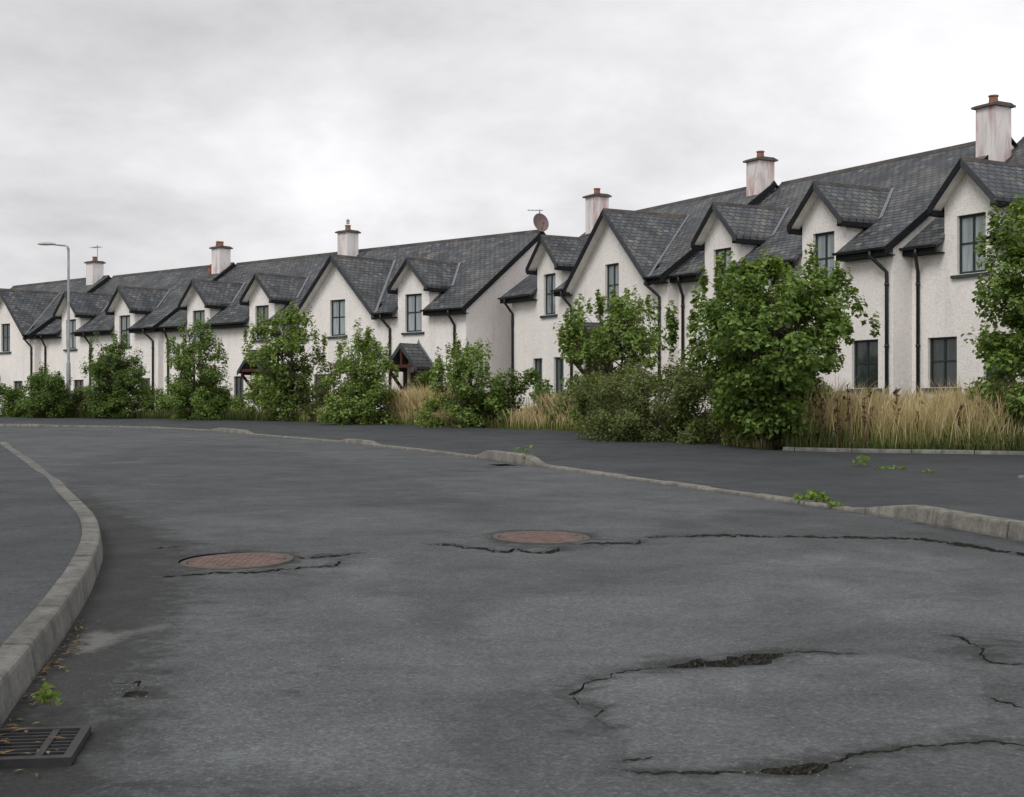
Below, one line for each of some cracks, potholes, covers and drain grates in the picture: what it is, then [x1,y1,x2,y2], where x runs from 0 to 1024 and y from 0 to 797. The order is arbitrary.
drain grate [0,725,91,769]
manhole cover [492,531,591,550]
crack [164,553,359,578]
manhole cover [179,552,294,569]
crack [991,698,1022,708]
pothole [667,653,783,669]
crack [948,635,1022,665]
crack [569,651,856,728]
crack [614,740,1024,775]
pothole [760,762,828,775]
crack [429,534,1024,556]
